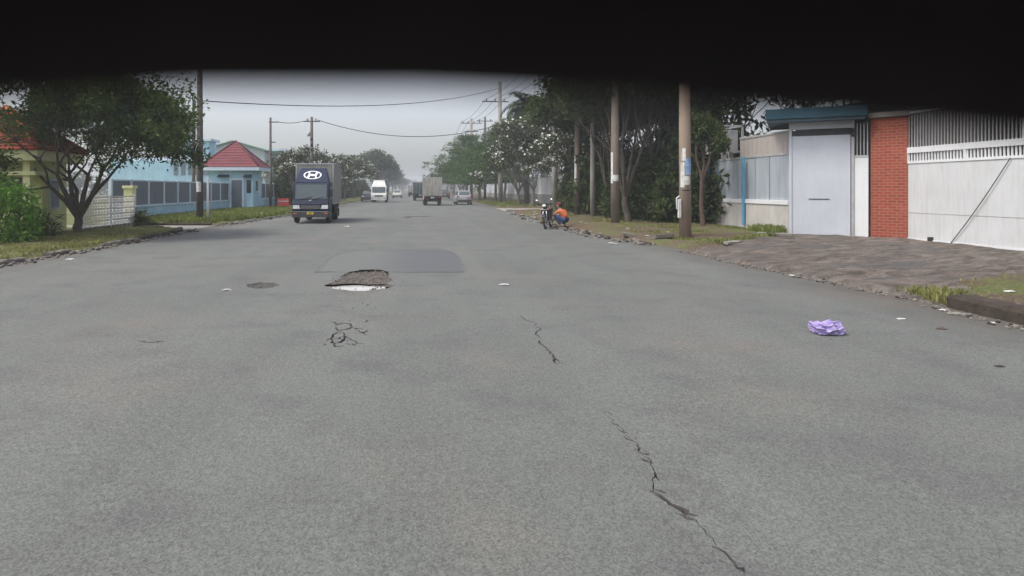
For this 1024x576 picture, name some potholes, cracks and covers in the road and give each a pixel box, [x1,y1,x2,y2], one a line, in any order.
crack [321,320,368,347]
crack [604,411,746,576]
crack [521,316,563,364]
pothole [324,270,393,291]
